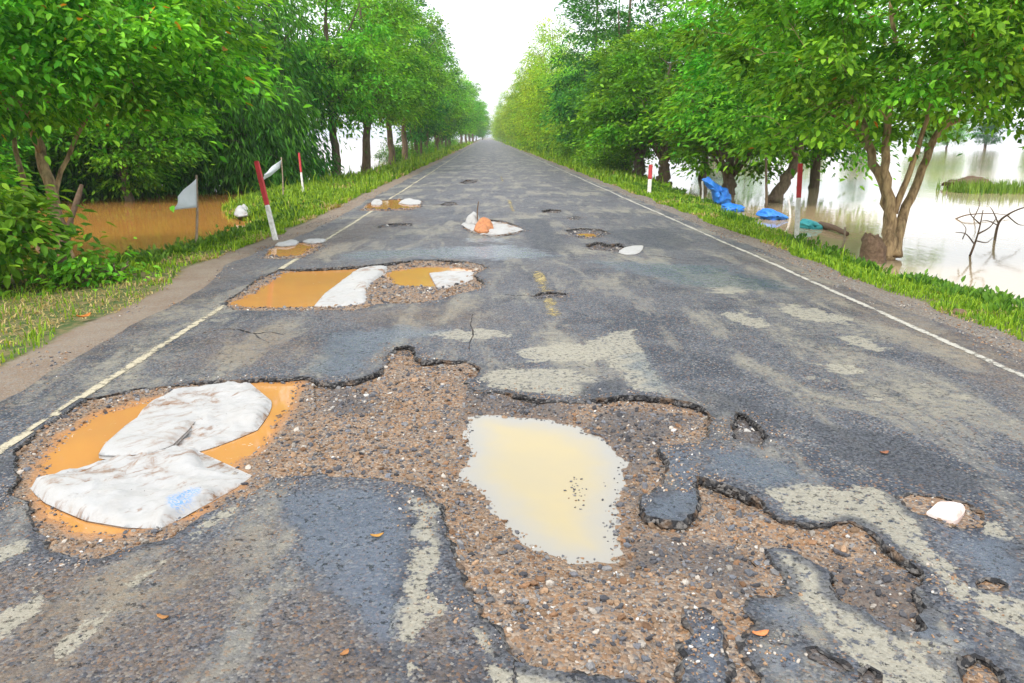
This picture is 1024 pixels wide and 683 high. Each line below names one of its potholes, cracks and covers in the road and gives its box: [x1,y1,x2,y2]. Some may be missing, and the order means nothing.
pothole [525,290,580,301]
pothole [206,257,504,315]
pothole [692,463,1004,659]
pothole [253,239,335,260]
pothole [300,342,820,683]
pothole [354,198,426,211]
pothole [555,227,619,239]
pothole [0,368,324,599]
crack [204,328,296,342]
pothole [454,218,529,237]
pothole [581,241,626,252]
